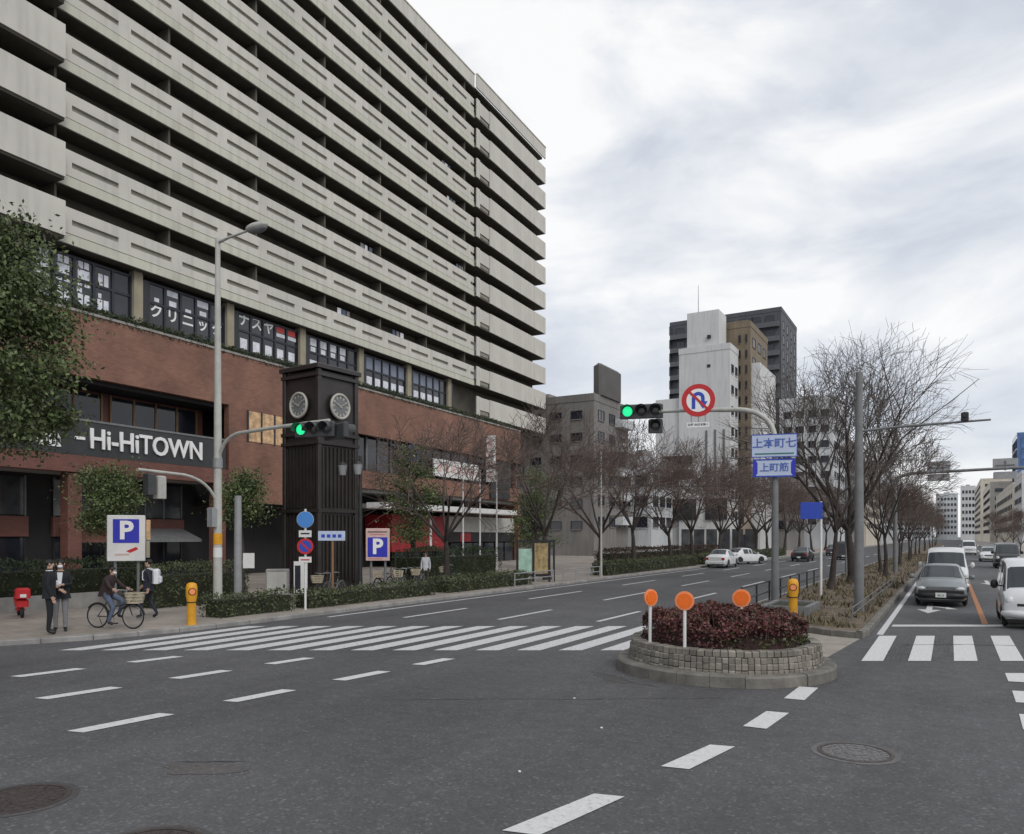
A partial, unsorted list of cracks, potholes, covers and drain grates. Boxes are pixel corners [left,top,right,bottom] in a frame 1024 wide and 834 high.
manhole cover [118,825,213,834]
manhole cover [0,782,80,817]
manhole cover [811,741,902,765]
